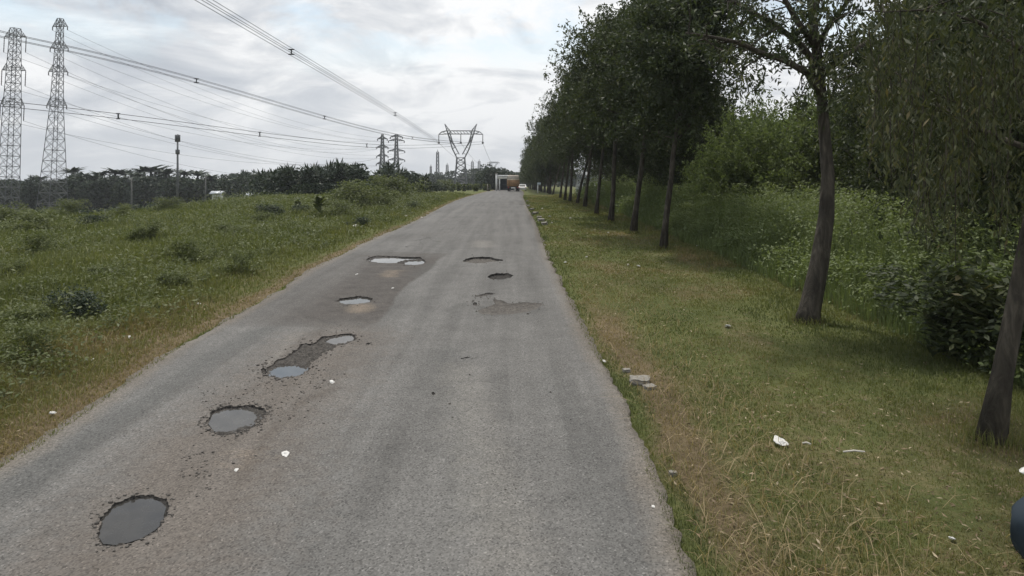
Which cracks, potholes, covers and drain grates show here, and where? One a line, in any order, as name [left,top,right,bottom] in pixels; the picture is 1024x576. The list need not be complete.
pothole [478,299,542,315]
pothole [265,333,356,379]
pothole [337,296,373,304]
pothole [206,405,266,436]
pothole [366,256,426,265]
pothole [96,494,170,547]
